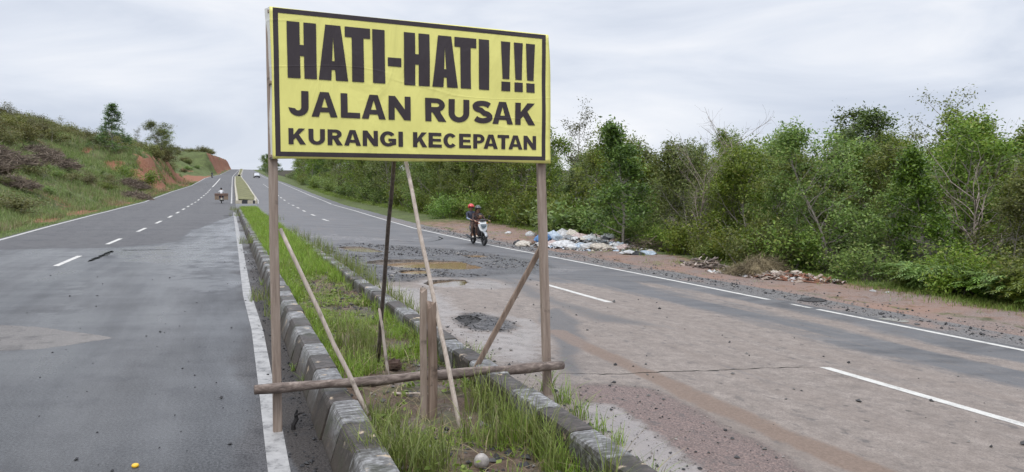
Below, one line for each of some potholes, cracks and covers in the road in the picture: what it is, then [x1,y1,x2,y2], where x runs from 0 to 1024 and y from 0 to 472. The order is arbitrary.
crack [87,249,171,262]
pothole [423,279,467,287]
pothole [367,259,483,269]
crack [571,367,798,375]
